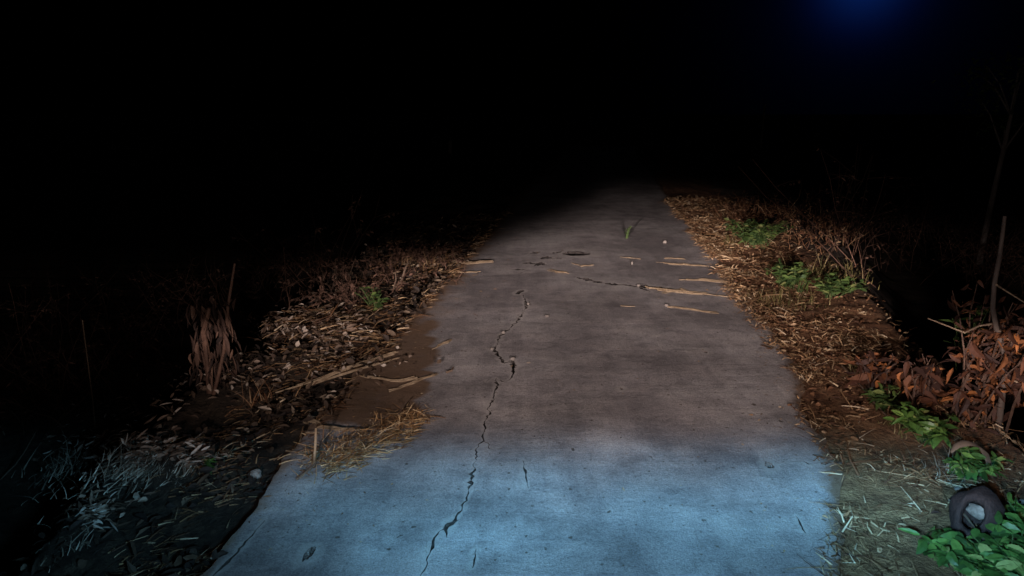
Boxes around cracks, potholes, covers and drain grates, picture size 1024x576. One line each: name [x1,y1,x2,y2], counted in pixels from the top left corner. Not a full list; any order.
crack [577,277,704,295]
crack [420,294,530,576]
